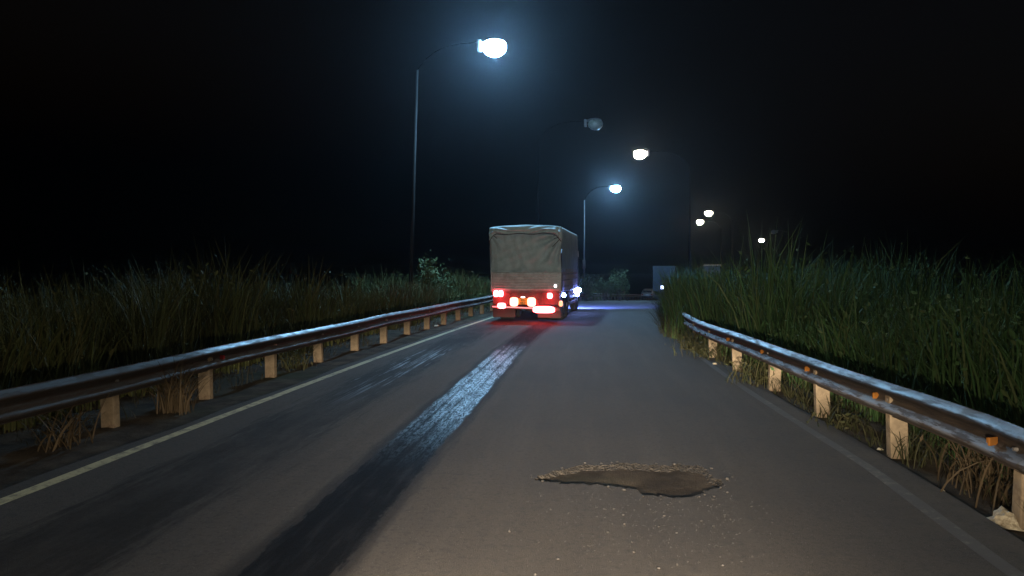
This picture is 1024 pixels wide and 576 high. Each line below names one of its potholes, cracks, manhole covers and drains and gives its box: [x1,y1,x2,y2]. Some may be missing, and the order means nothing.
pothole [535,463,725,498]
